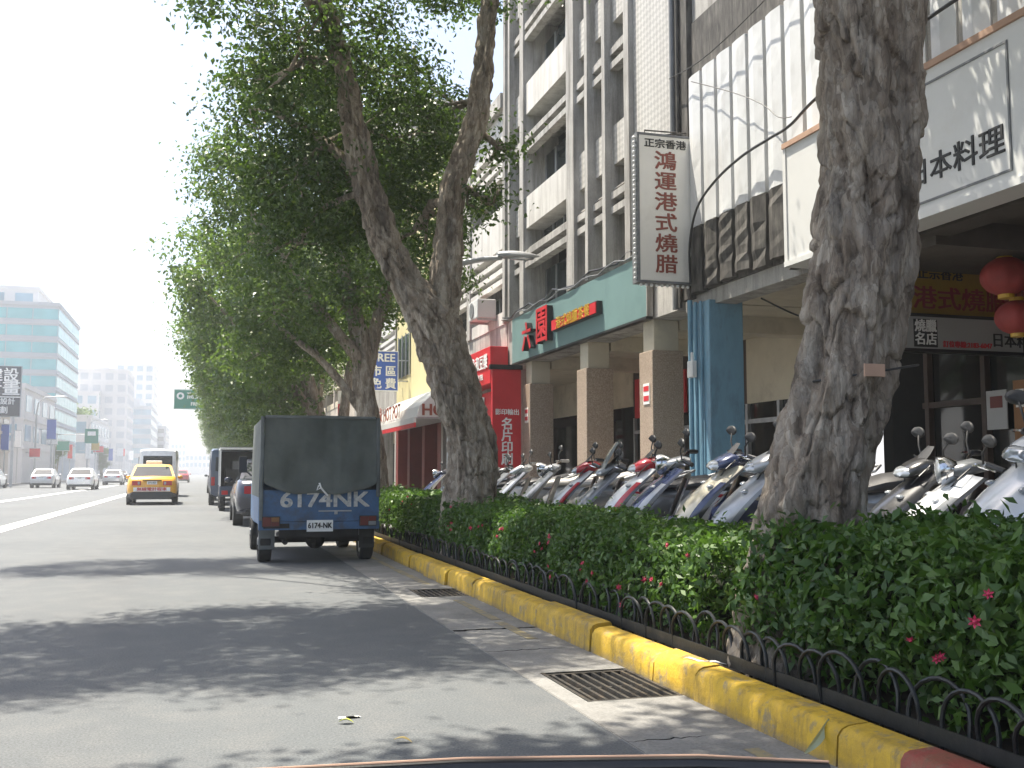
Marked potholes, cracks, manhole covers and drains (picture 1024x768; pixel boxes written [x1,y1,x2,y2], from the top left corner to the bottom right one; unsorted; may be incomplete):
crack [628,733,720,745]
